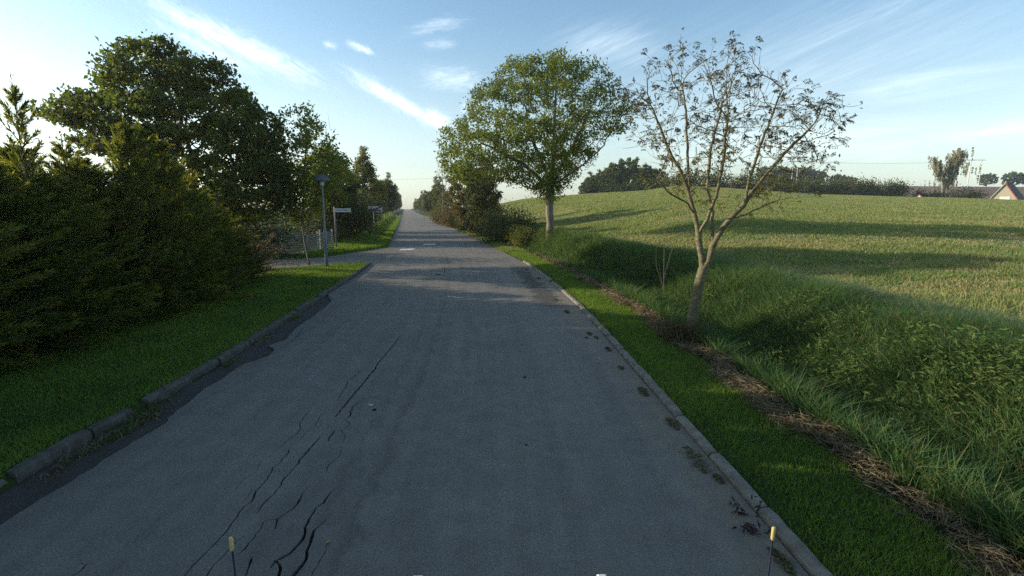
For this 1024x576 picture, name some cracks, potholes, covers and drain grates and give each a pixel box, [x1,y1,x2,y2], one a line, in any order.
crack [276,502,325,576]
